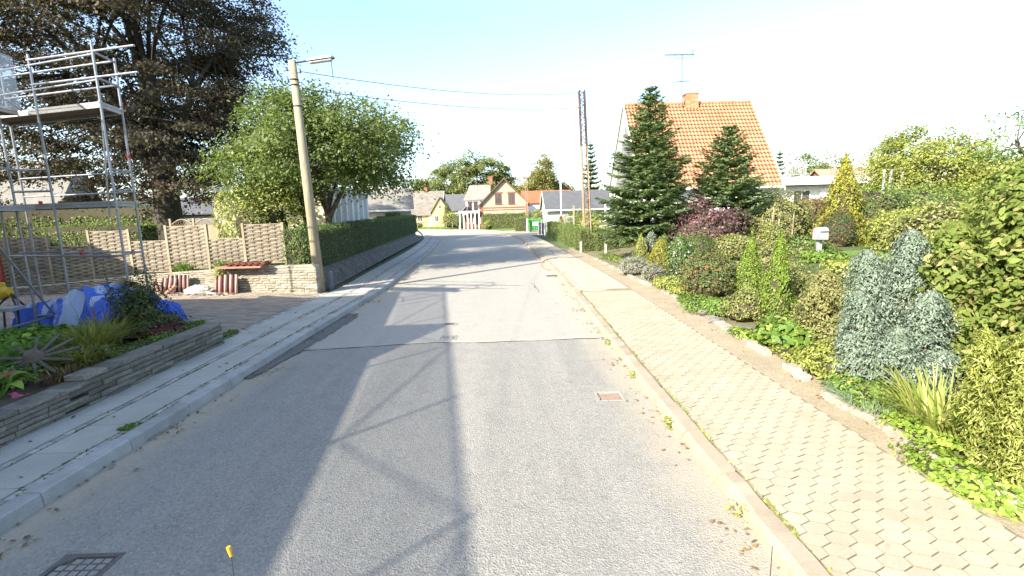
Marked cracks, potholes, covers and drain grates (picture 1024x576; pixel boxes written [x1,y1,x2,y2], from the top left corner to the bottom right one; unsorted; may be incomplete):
manhole cover [594,391,626,401]
